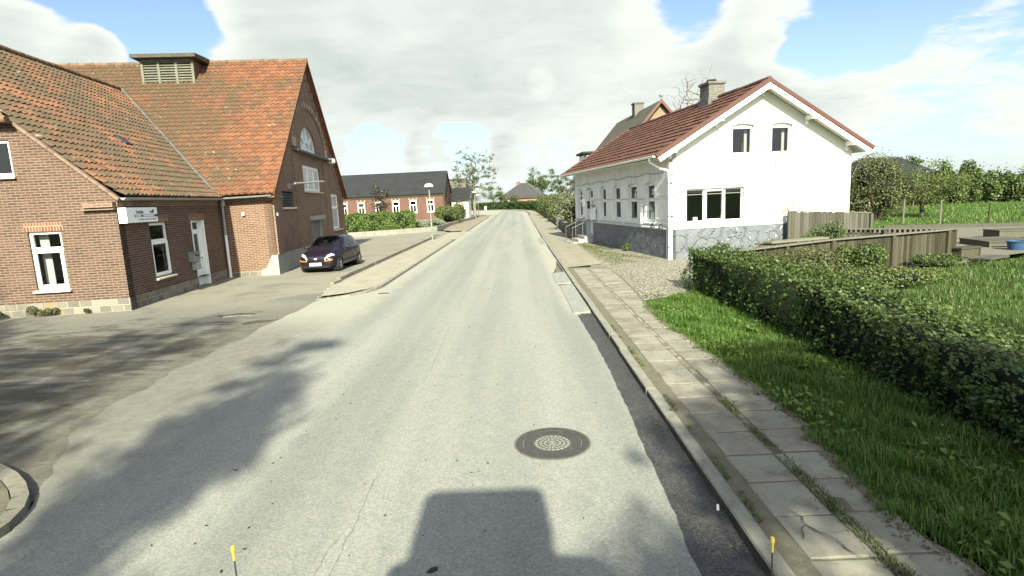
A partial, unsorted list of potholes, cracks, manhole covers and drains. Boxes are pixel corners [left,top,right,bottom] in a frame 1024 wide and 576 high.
crack [790,510,864,559]
manhole cover [514,427,591,460]
